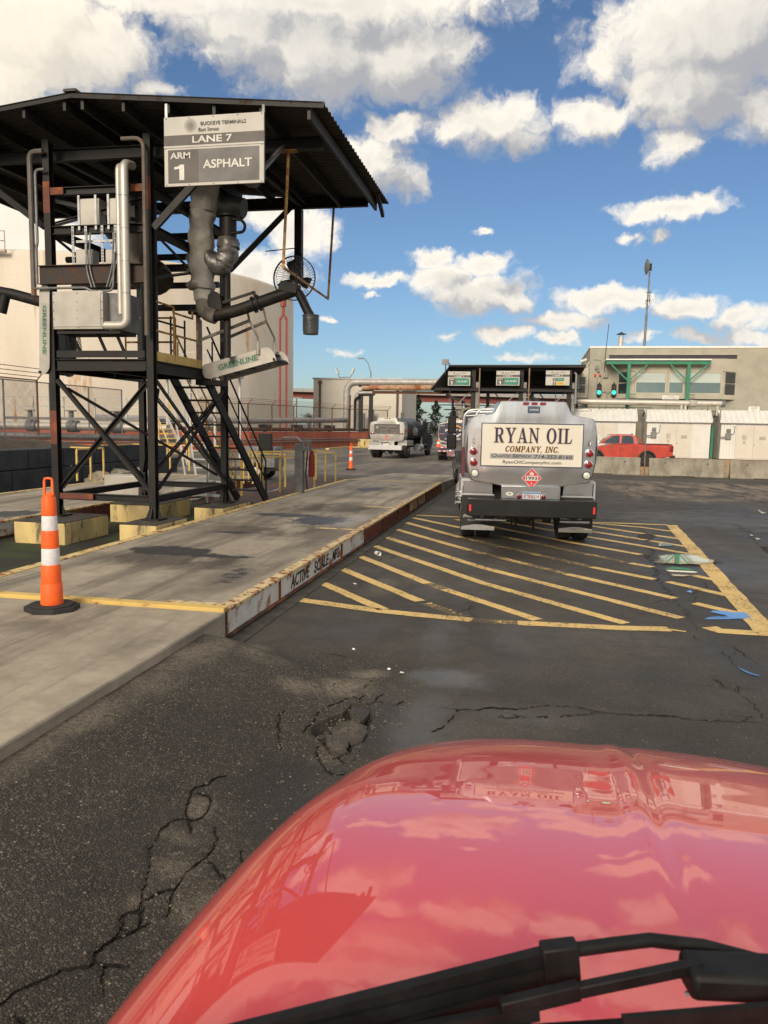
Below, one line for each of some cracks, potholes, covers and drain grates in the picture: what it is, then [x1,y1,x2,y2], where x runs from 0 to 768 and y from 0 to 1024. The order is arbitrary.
pothole [310,703,372,758]
crack [0,775,243,1024]
crack [432,645,763,732]
